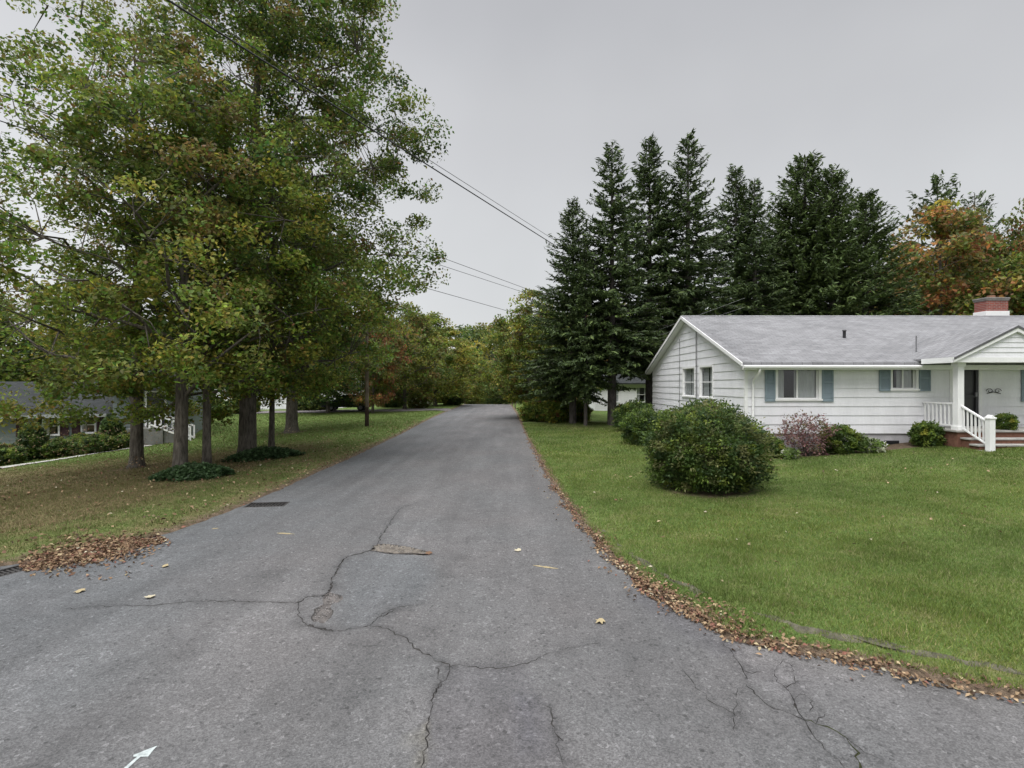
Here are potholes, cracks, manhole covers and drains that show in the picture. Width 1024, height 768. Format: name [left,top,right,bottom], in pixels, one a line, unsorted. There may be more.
crack [685,644,885,768]
crack [65,507,600,767]
pothole [311,592,343,623]
drain grate [0,562,34,577]
